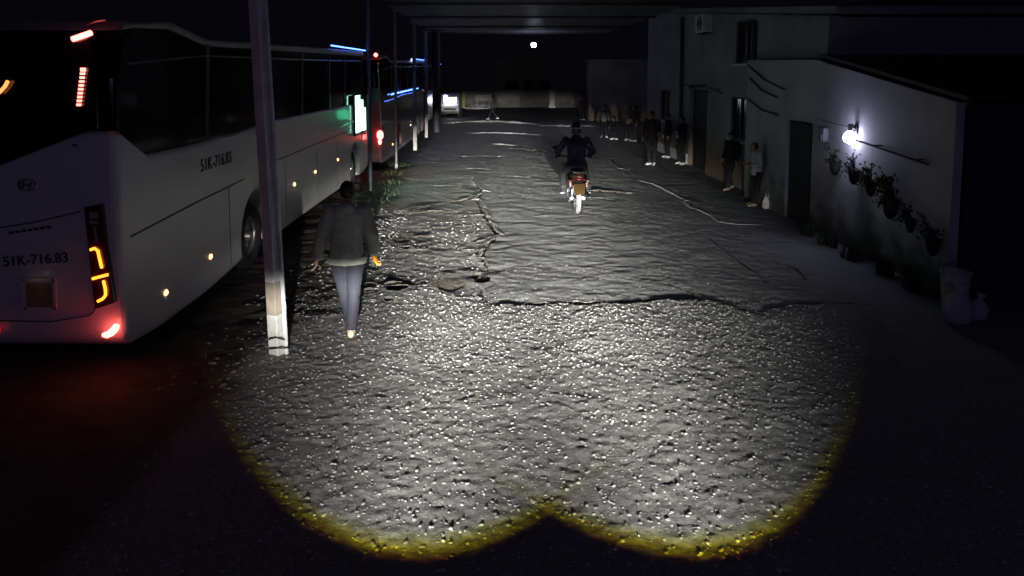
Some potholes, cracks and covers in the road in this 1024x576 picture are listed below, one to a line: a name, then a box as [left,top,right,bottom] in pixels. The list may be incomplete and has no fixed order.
pothole [429,273,474,296]
pothole [379,283,415,292]
crack [382,132,886,317]
pothole [461,270,496,286]
